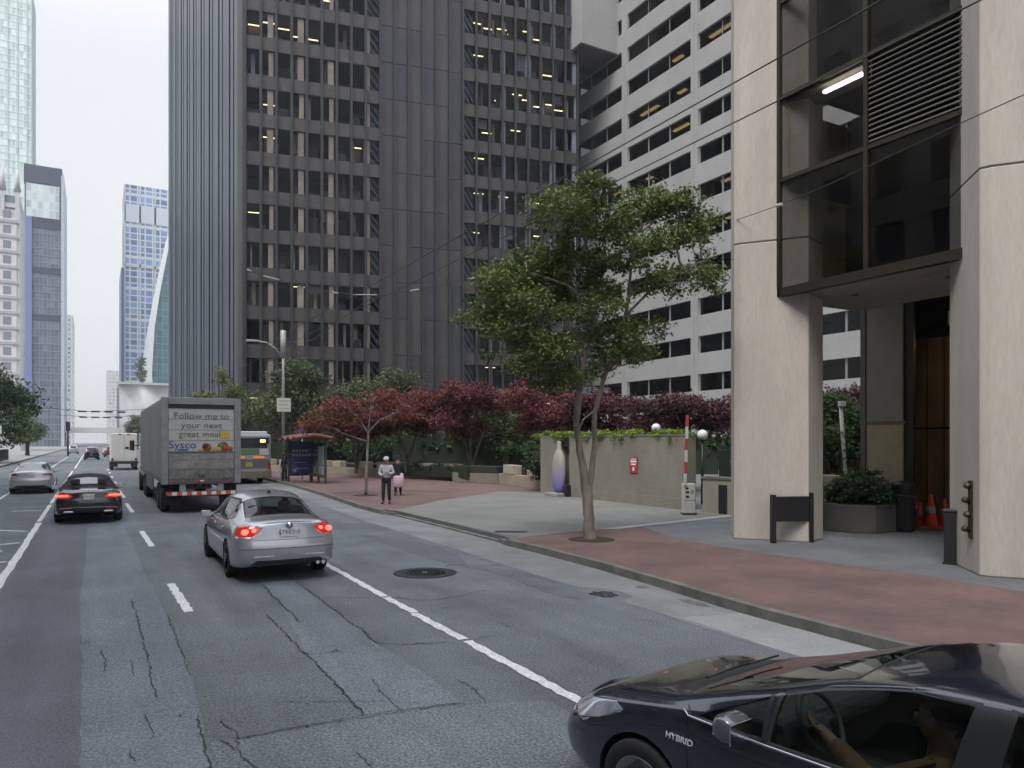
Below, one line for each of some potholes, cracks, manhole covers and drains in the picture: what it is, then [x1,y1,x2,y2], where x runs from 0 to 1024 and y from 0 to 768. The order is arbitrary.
crack [299,584,492,645]
crack [129,601,257,768]
manhole cover [393,567,457,579]
crack [274,679,401,710]
